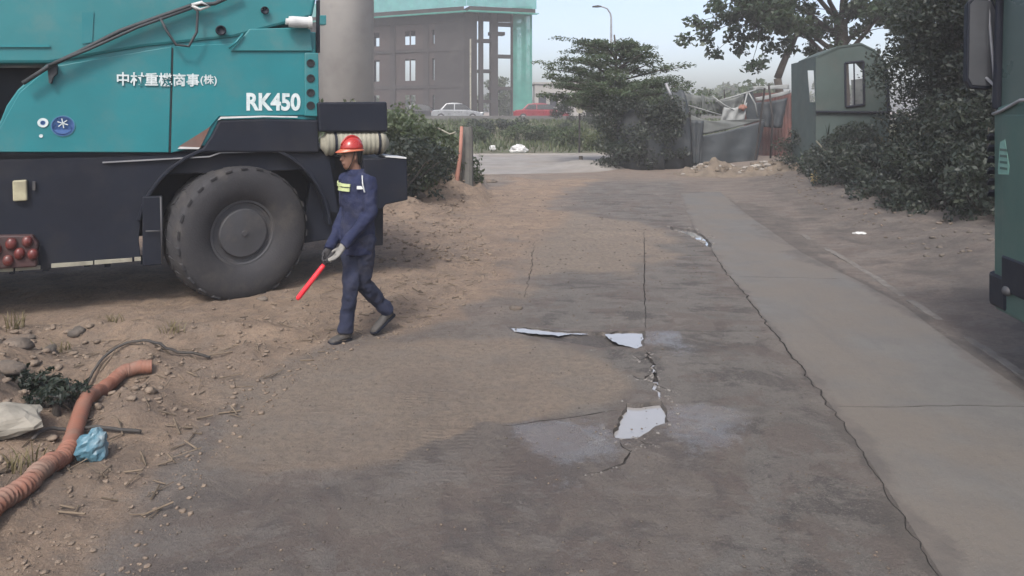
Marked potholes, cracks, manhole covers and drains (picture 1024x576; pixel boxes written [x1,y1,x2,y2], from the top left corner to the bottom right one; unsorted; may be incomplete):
pothole [670,226,712,247]
crack [588,440,652,474]
crack [503,410,614,426]
crack [631,351,665,399]
pothole [613,401,669,439]
pothole [506,326,647,349]
crack [638,229,646,329]
